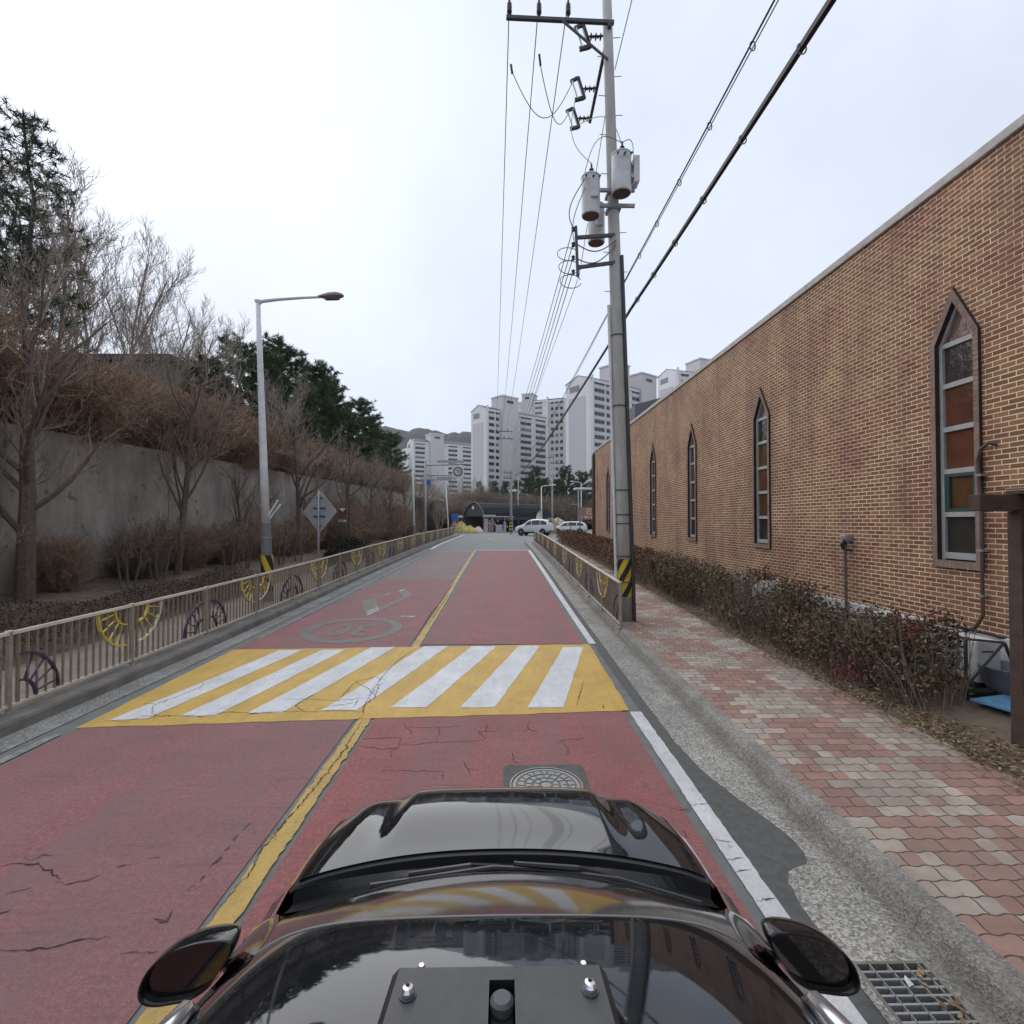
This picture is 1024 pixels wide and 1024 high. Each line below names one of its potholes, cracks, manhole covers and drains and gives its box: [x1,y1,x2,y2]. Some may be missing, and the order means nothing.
crack [0,854,100,913]
manhole cover [503,764,591,791]
crack [368,723,497,757]
crack [106,649,415,916]
crack [0,936,157,954]
drain grate [852,960,984,1024]
